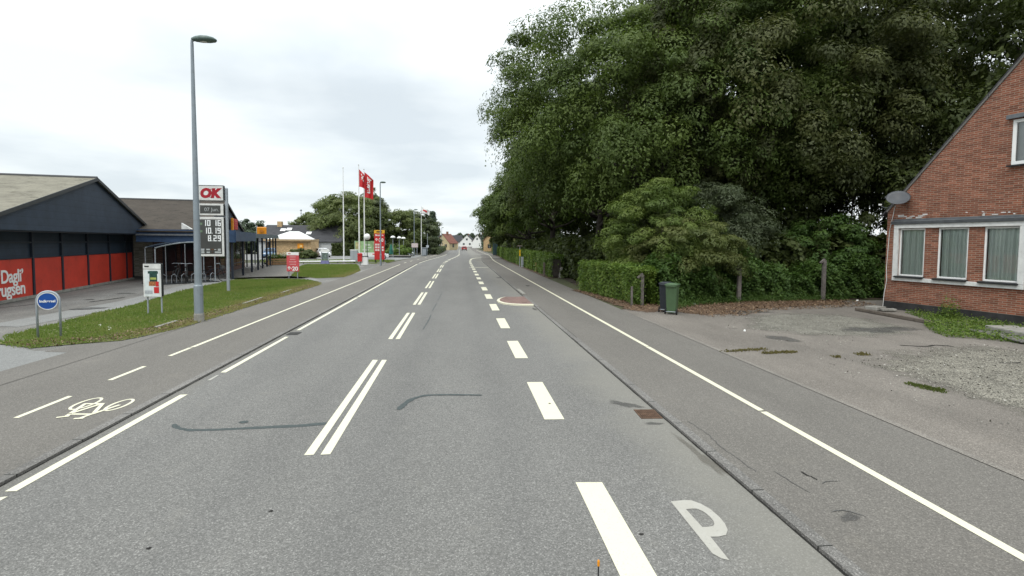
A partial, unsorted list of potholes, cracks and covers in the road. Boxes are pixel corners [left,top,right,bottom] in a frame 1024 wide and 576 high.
drain grate [634,409,663,419]
